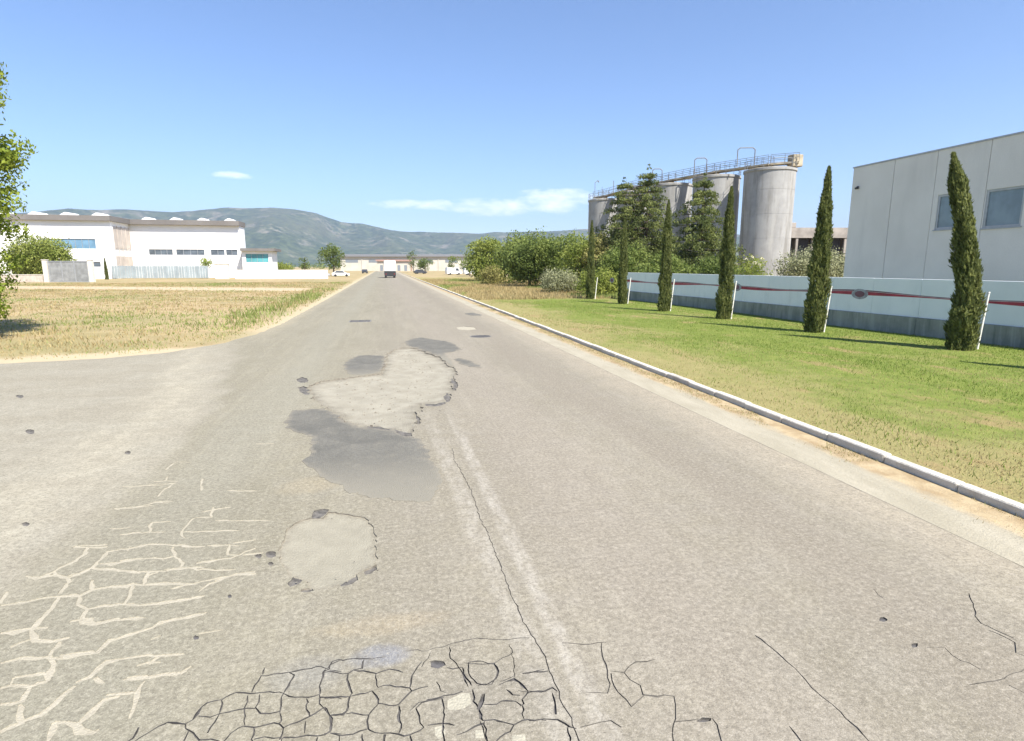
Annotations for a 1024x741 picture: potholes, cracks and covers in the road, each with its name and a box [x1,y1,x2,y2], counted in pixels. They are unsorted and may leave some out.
crack [755,635,869,741]
crack [0,461,722,741]
pothole [312,509,329,519]
crack [927,594,1024,693]
